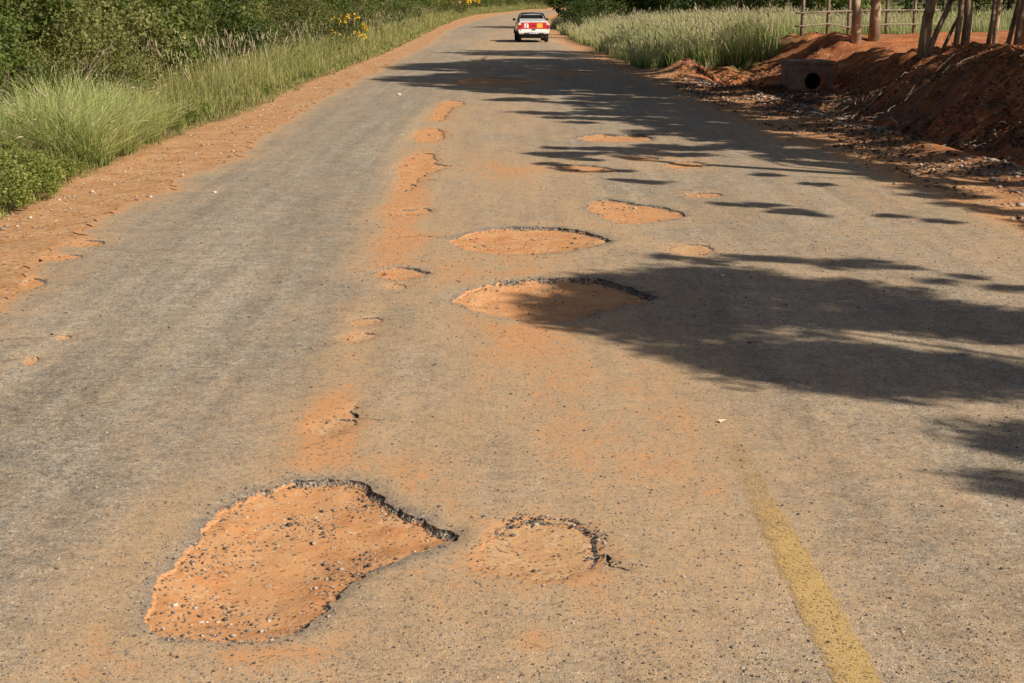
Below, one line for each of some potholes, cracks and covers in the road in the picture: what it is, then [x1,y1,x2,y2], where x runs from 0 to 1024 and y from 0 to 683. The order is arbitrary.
pothole [553,165,619,173]
pothole [478,520,599,580]
pothole [577,134,653,143]
pothole [413,128,446,143]
pothole [669,244,715,256]
pothole [341,332,376,343]
pothole [450,278,658,323]
pothole [587,199,685,224]
pothole [371,267,431,280]
pothole [143,478,459,643]
pothole [348,317,383,326]
